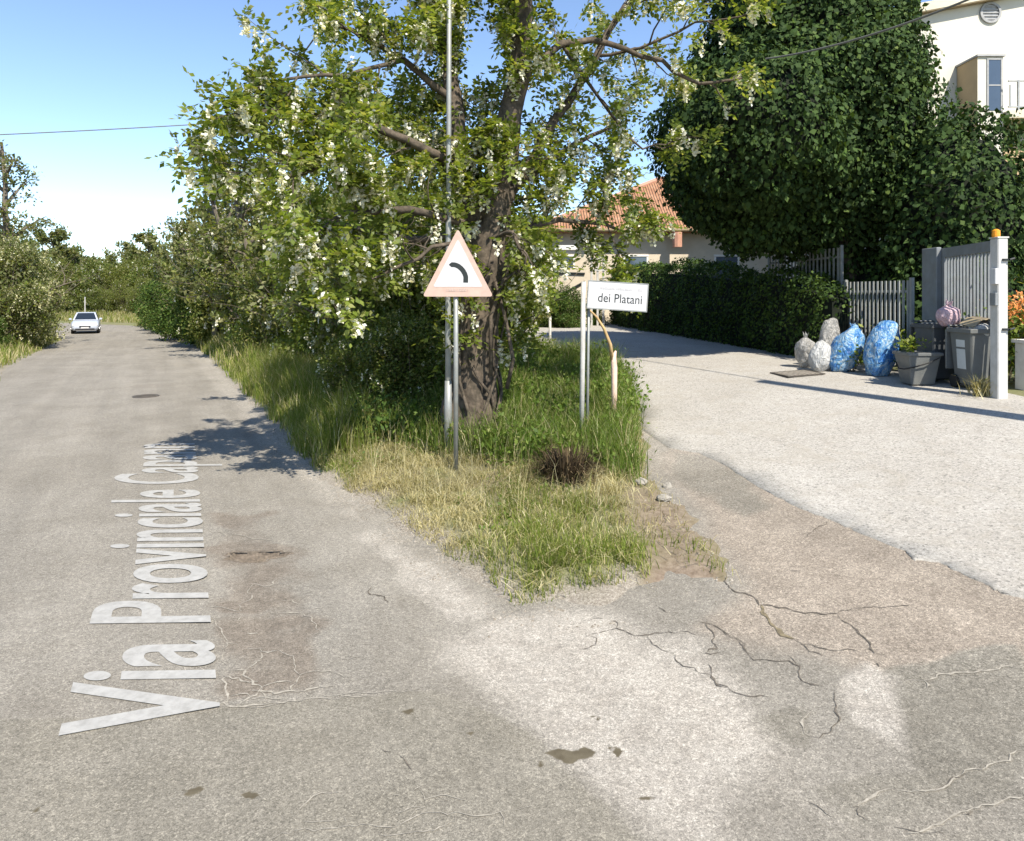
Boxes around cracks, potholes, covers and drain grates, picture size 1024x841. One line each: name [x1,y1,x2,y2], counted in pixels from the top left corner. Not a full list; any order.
crack [584,580,910,738]
crack [209,529,369,707]
